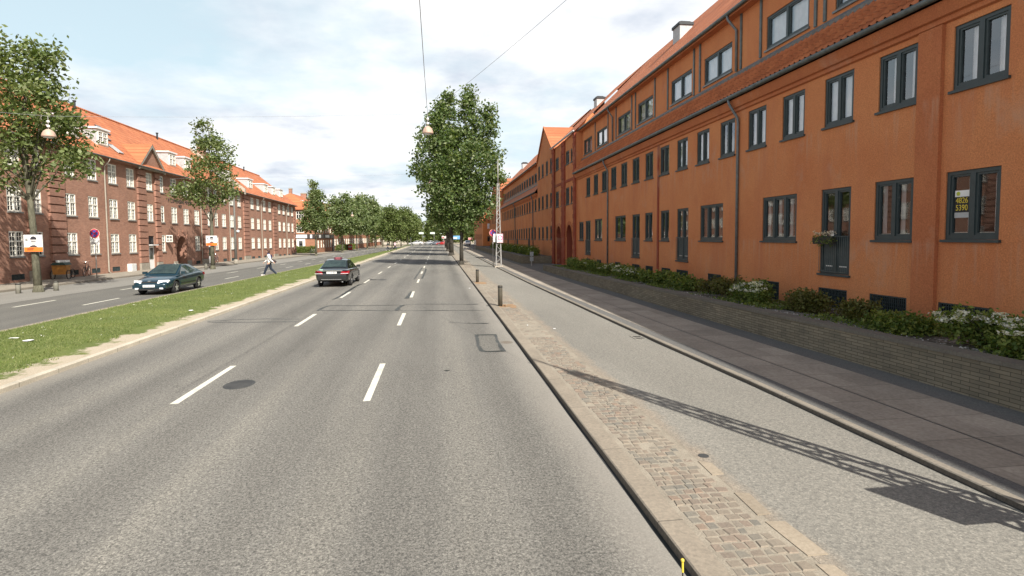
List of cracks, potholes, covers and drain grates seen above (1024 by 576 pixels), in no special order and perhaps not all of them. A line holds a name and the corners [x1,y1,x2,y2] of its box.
manhole cover [223,380,255,389]
